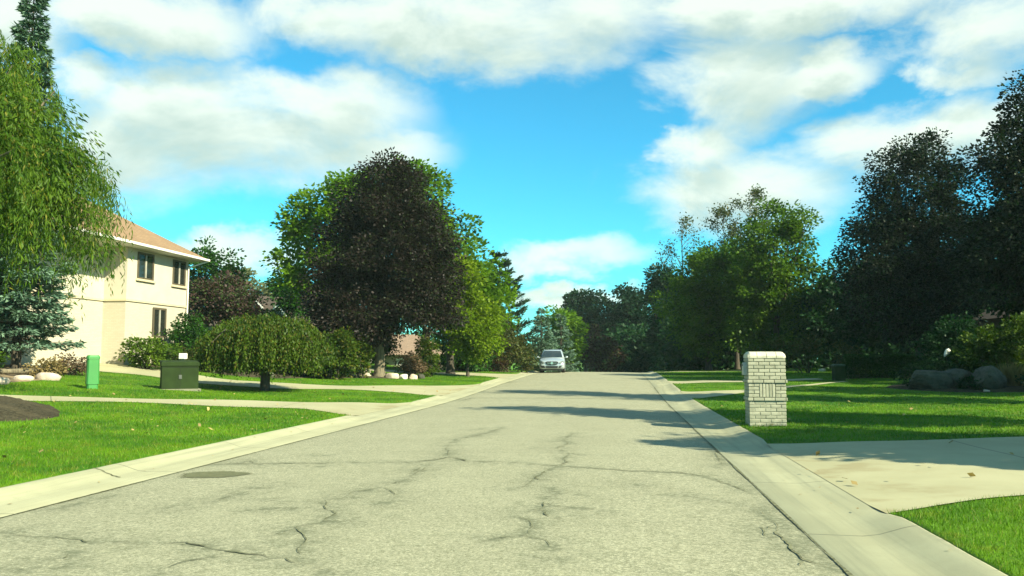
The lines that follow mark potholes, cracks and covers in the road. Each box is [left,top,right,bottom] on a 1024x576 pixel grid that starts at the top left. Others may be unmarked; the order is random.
crack [0,386,854,576]
